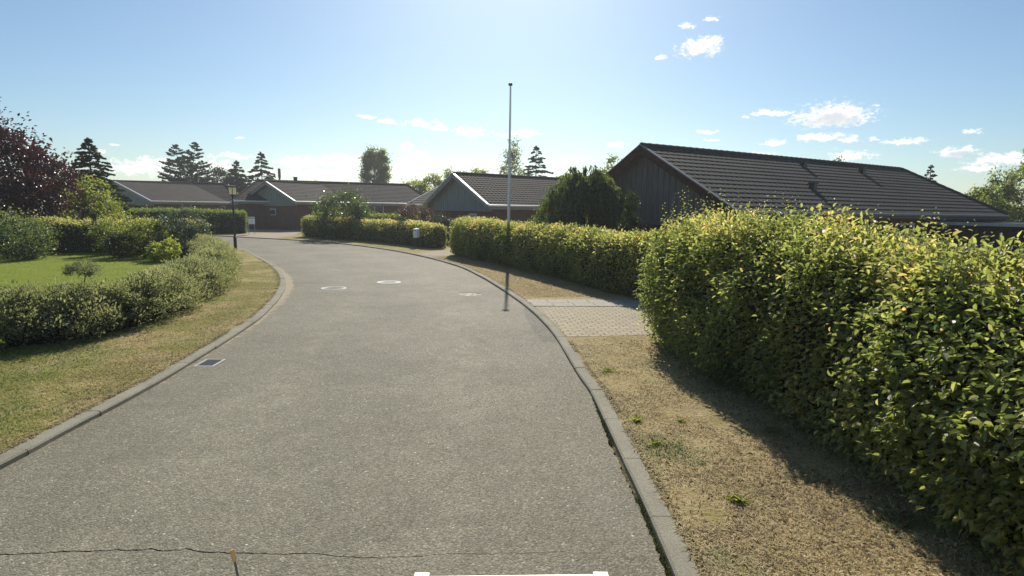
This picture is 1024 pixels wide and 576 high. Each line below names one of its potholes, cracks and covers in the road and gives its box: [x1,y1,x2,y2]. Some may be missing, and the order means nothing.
drain grate [193,359,226,367]
crack [1,548,550,558]
